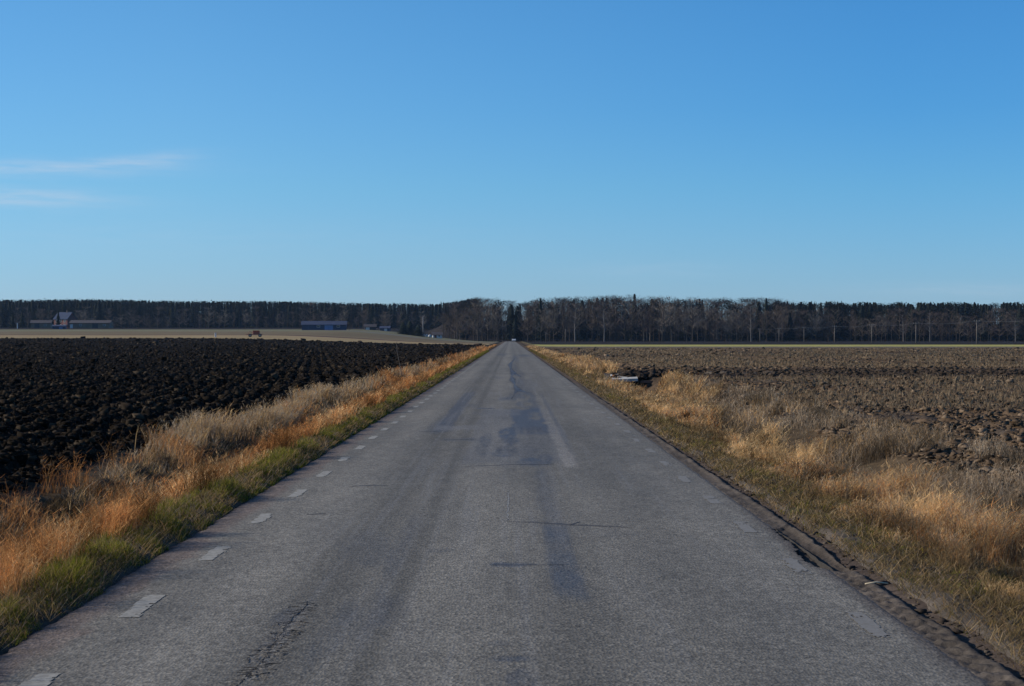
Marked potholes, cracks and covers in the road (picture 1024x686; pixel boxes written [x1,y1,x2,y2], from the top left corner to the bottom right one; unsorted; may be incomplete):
crack [228,602,317,686]
